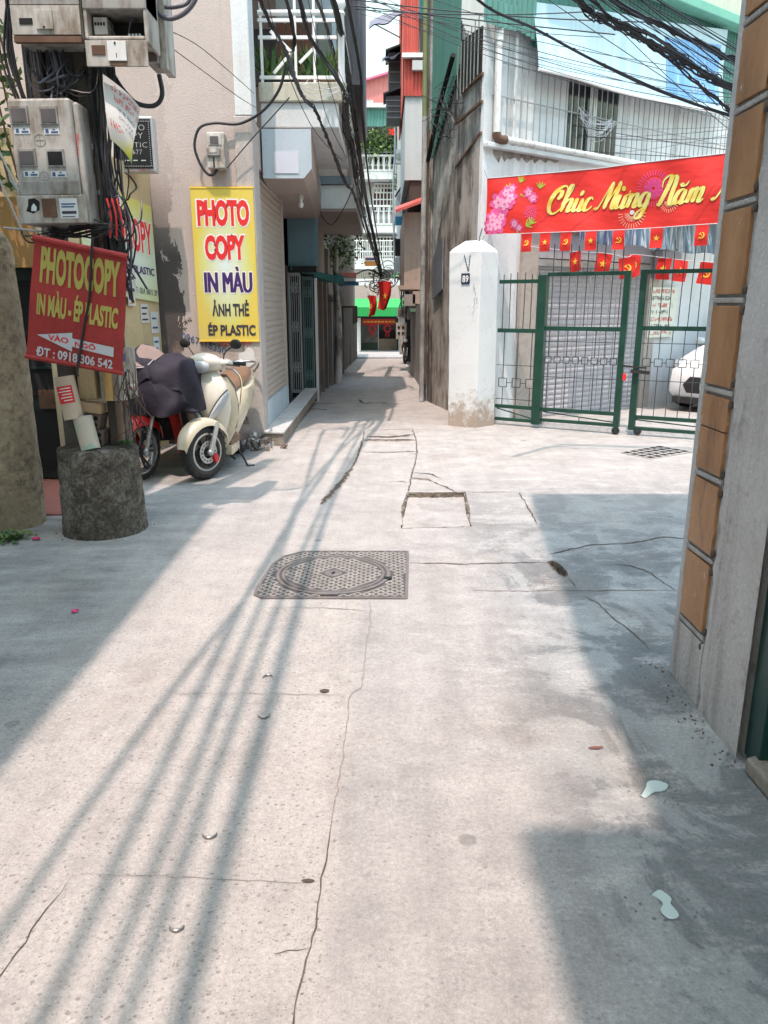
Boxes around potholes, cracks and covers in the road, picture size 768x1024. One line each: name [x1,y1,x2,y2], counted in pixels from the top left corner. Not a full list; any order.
crack [279,601,371,1024]
manhole cover [254,550,409,599]
crack [447,536,684,647]
crack [320,430,456,504]
crack [0,877,71,976]
